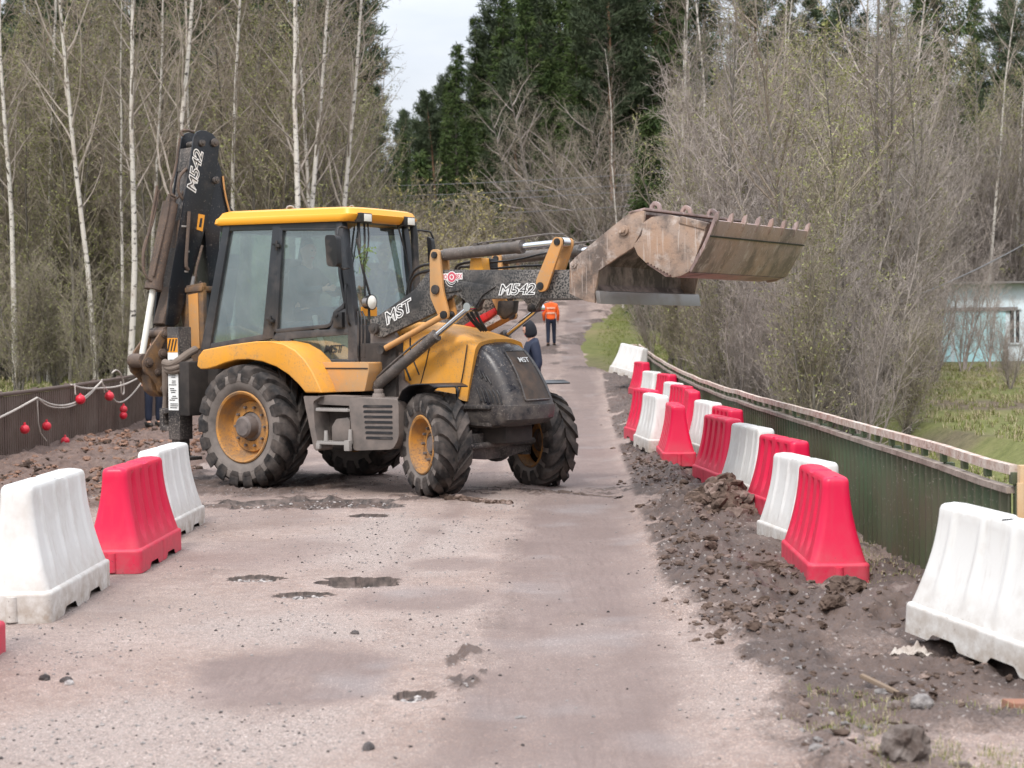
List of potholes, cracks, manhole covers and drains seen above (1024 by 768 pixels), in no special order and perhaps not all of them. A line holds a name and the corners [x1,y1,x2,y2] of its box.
pothole [247,589,362,604]
pothole [202,495,433,512]
pothole [329,512,403,520]
pothole [206,572,309,586]
pothole [291,574,422,597]
